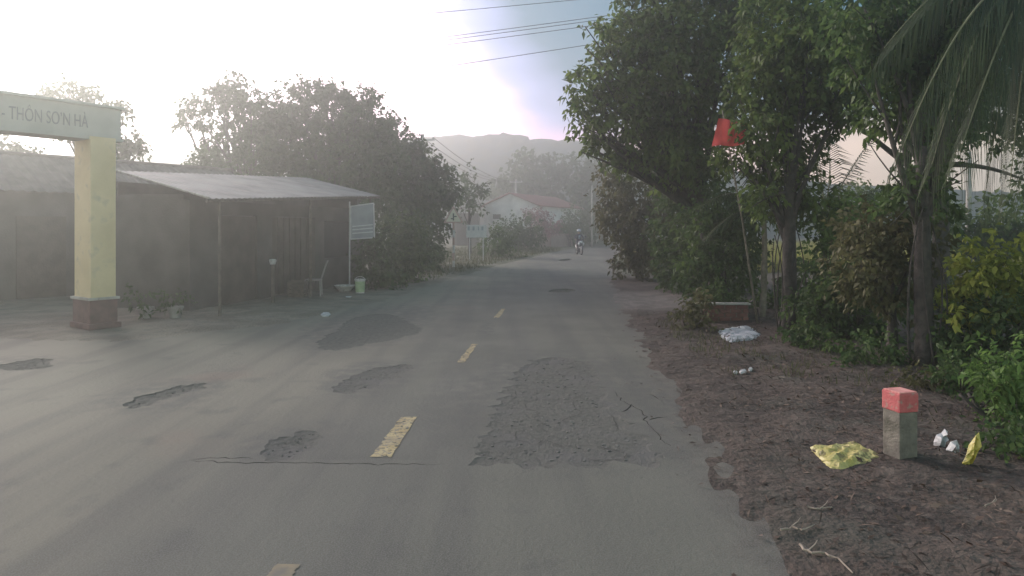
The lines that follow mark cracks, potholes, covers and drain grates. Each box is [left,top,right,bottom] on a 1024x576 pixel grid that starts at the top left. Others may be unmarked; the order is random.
pothole [259,430,323,461]
pothole [0,358,54,371]
pothole [331,364,414,394]
crack [467,357,671,470]
crack [185,457,454,465]
pothole [122,383,207,409]
